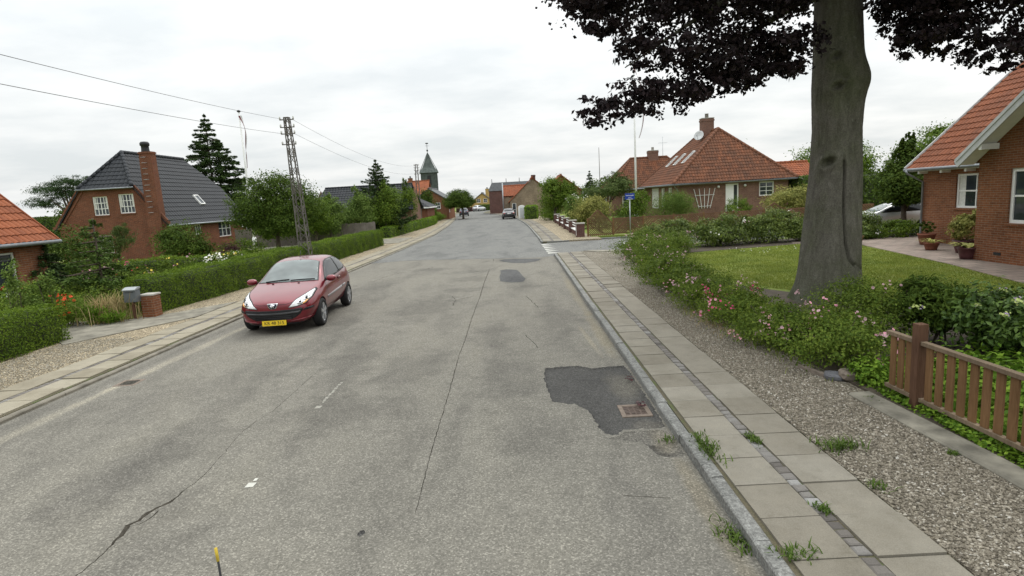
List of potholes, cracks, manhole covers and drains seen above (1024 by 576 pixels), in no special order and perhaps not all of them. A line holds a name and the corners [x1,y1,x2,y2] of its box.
crack [76,369,321,576]
crack [415,270,489,513]
pothole [602,430,685,457]
drain grate [617,404,653,418]
